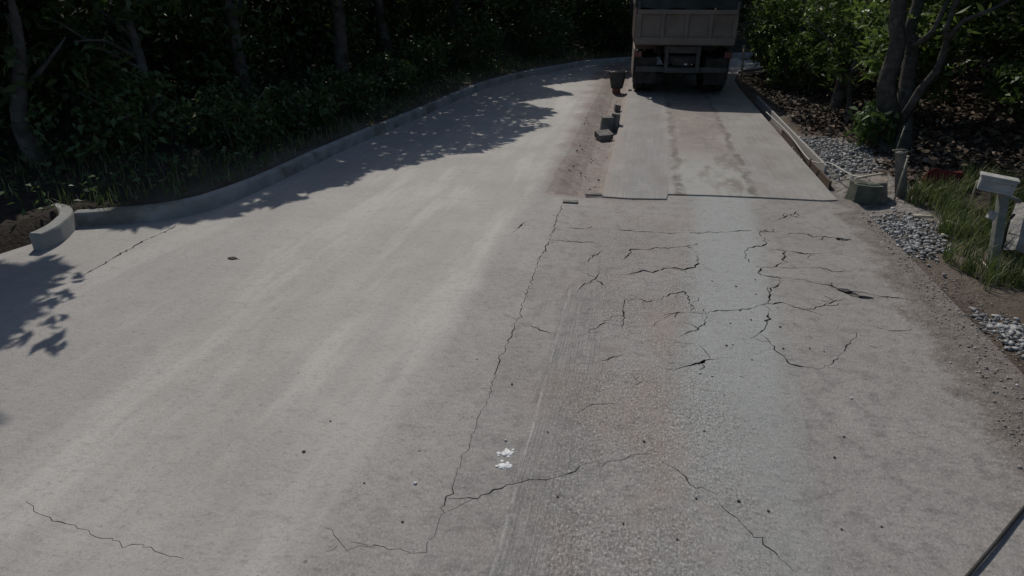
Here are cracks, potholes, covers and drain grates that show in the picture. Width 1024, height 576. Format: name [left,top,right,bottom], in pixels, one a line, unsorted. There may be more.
crack [327,205,912,572]
crack [27,502,184,559]
crack [84,224,179,275]
pothole [838,288,874,300]
